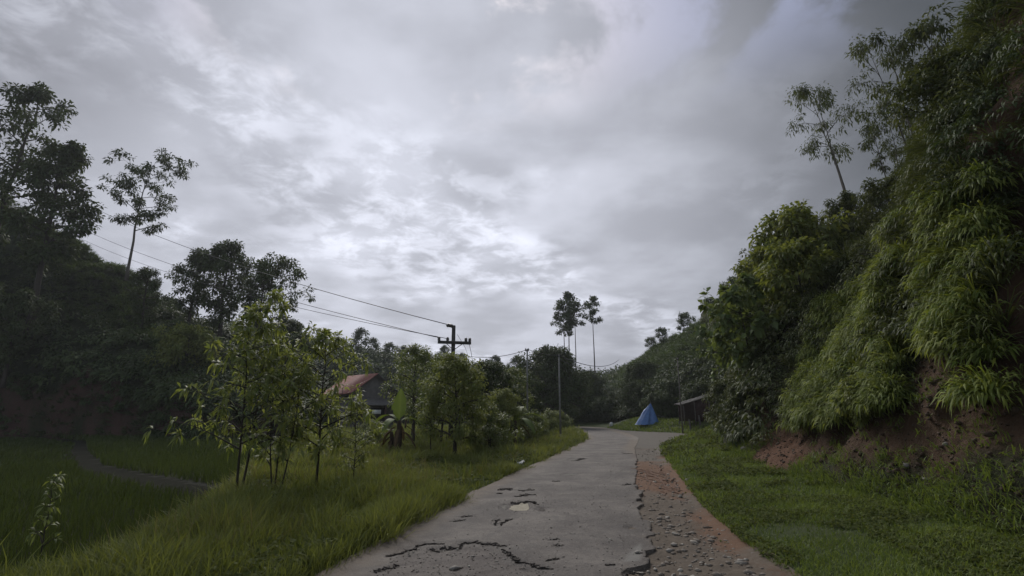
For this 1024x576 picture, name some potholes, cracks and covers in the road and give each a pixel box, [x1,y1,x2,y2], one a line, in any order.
pothole [509,503,529,511]
crack [605,564,646,576]
crack [373,488,560,573]
